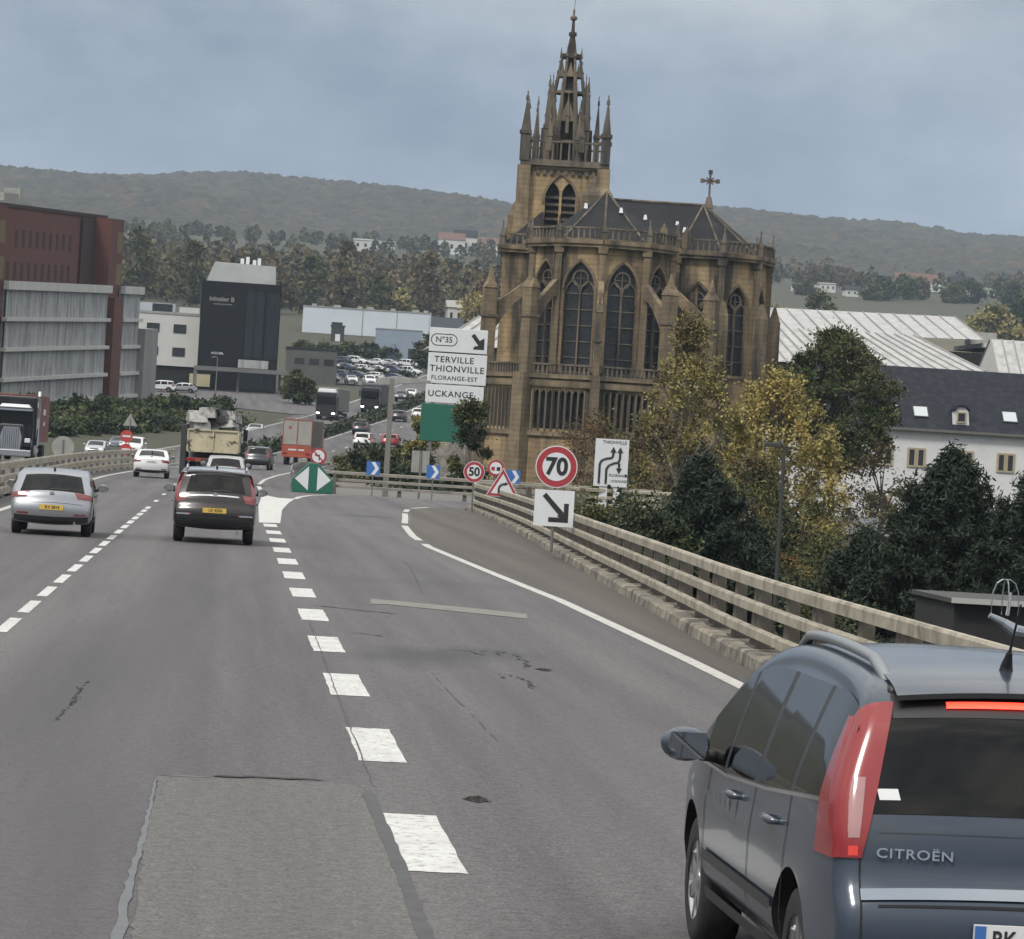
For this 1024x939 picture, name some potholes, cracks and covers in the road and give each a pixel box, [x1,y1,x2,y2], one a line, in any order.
crack [454,649,533,687]
pothole [462,794,491,802]
crack [55,681,89,720]
